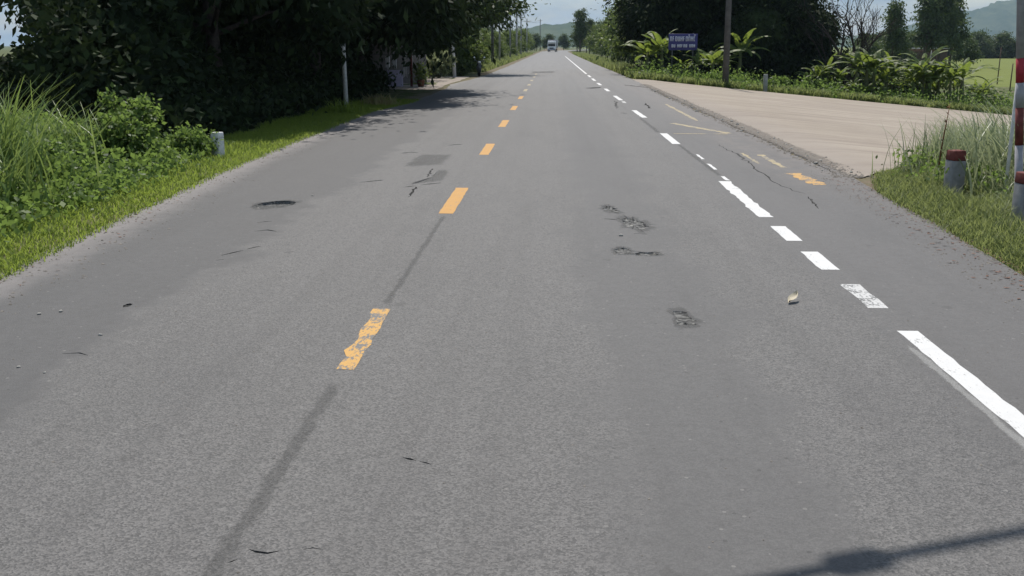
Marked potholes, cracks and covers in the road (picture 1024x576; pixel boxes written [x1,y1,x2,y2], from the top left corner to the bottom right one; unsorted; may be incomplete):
crack [406,152,436,197]
pothole [252,201,296,209]
crack [614,85,831,209]
pothole [673,311,697,326]
crack [228,549,278,563]
pothole [621,218,649,230]
